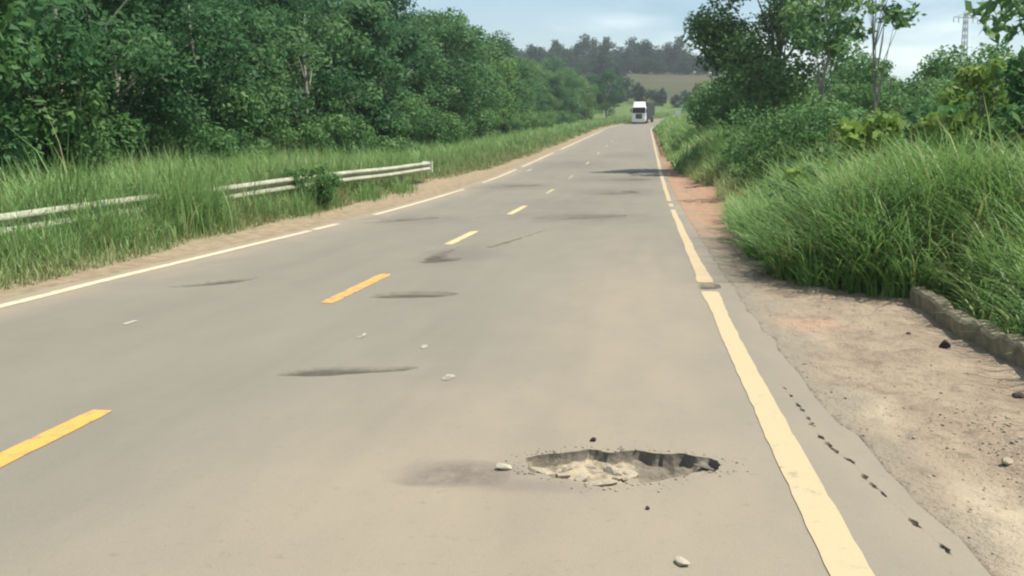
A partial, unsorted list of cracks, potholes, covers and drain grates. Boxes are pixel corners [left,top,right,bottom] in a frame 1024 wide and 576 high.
pothole [526,449,721,487]
